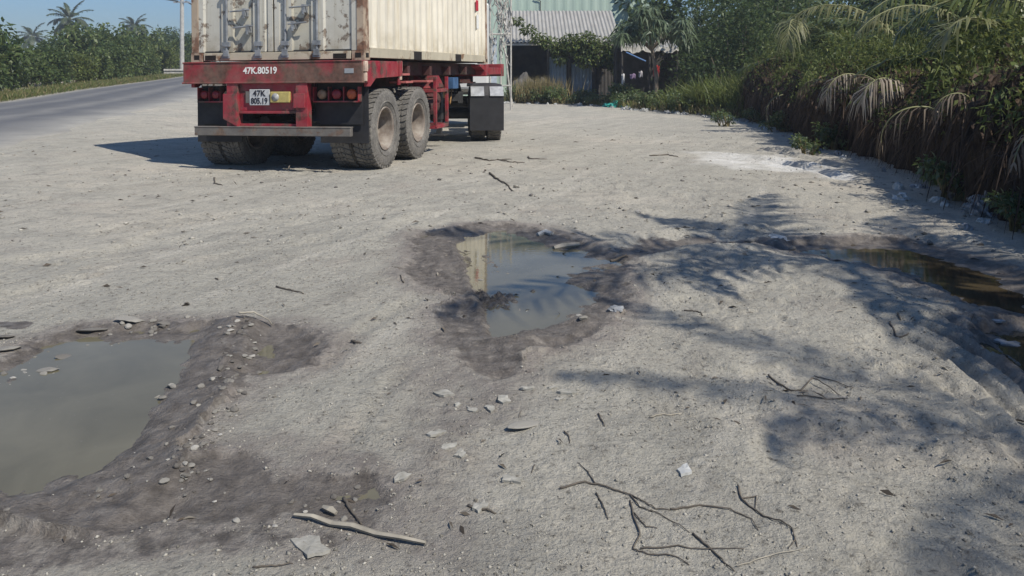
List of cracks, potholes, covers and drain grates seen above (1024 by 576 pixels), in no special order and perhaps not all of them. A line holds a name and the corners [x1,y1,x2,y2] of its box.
pothole [764,236,1024,321]
pothole [401,222,636,381]
pothole [0,315,329,535]
